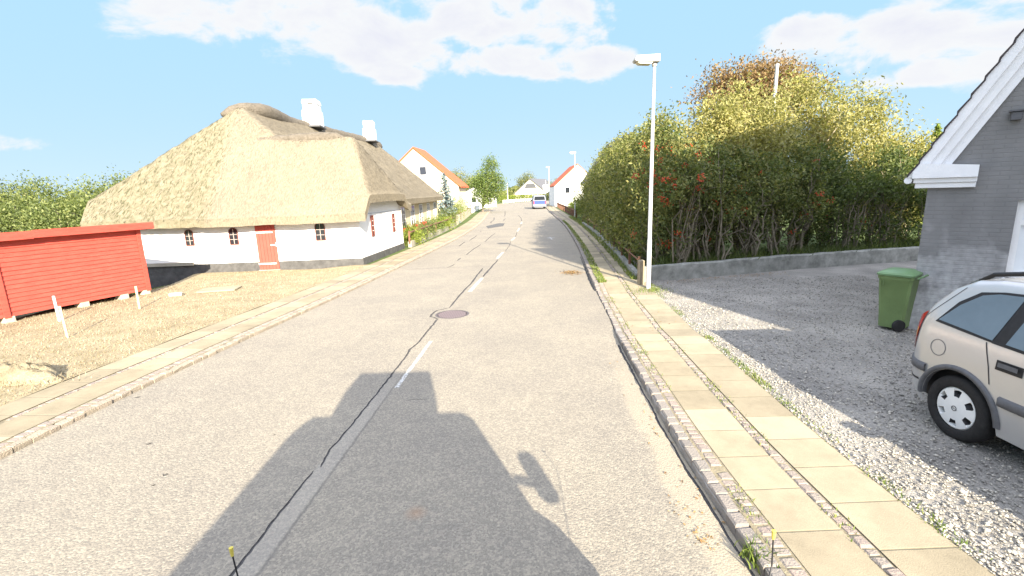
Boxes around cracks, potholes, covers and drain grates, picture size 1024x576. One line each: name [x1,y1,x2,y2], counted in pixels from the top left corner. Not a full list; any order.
manhole cover [435,310,469,319]
